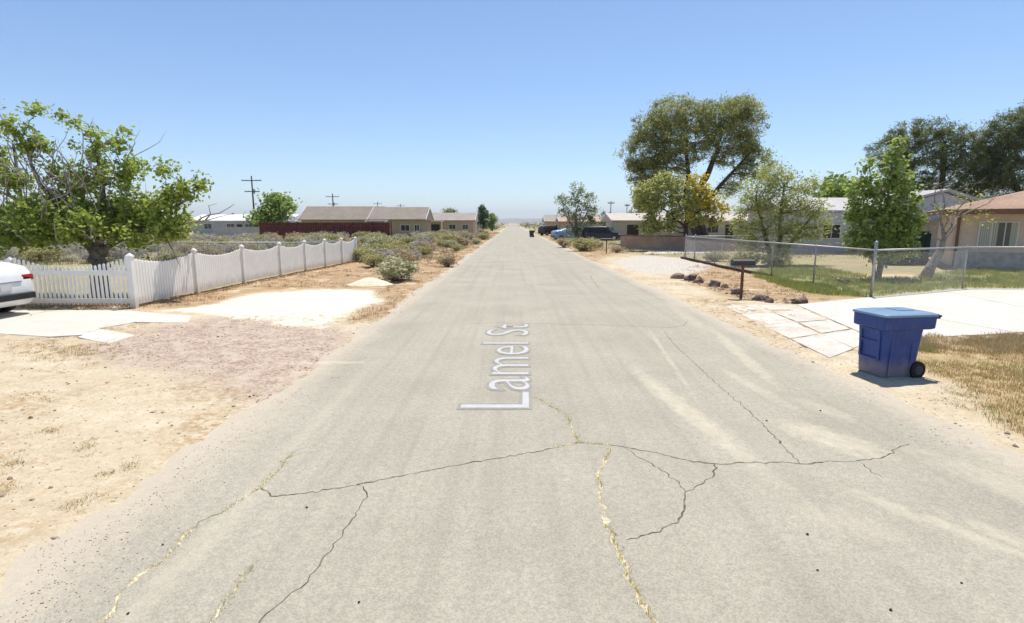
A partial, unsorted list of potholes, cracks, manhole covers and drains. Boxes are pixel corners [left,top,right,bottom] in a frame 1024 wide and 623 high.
crack [97,338,909,623]
